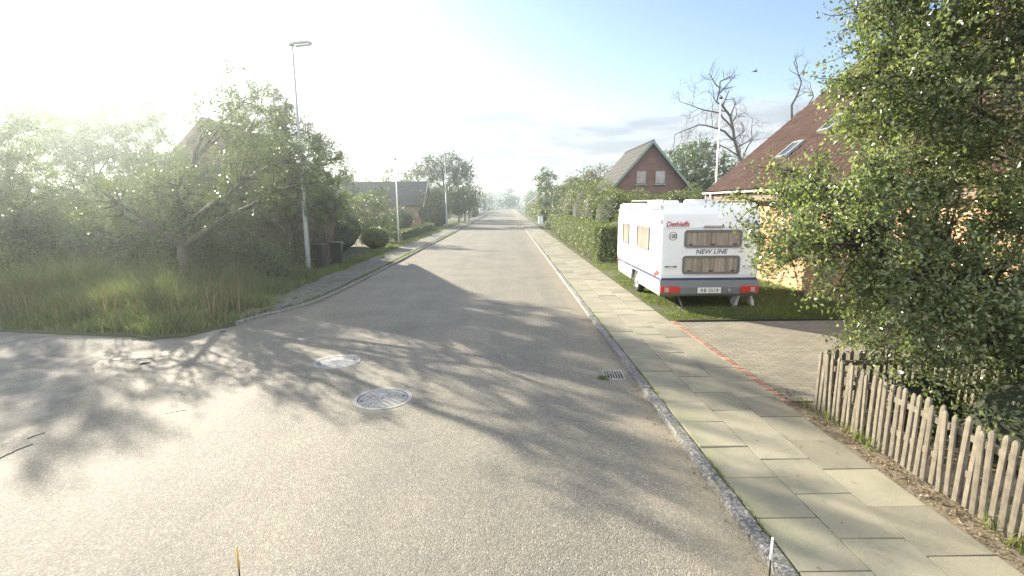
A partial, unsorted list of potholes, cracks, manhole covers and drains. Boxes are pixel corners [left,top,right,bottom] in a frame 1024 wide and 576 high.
manhole cover [313,355,361,369]
manhole cover [353,388,412,410]
drain grate [602,370,625,379]
